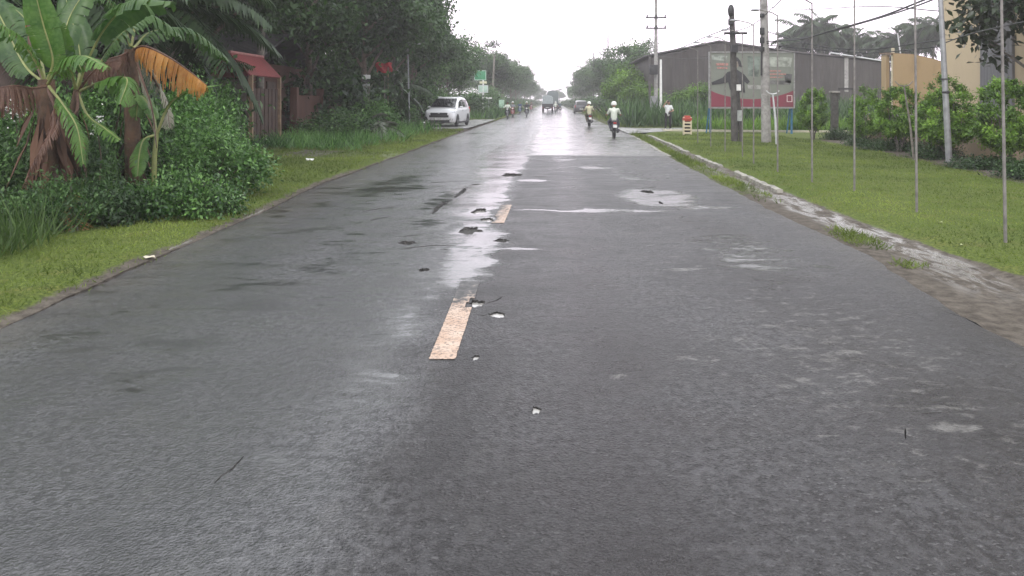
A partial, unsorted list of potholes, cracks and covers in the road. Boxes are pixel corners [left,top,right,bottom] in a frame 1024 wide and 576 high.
crack [431,181,479,214]
crack [214,456,244,483]
pothole [458,227,483,235]
